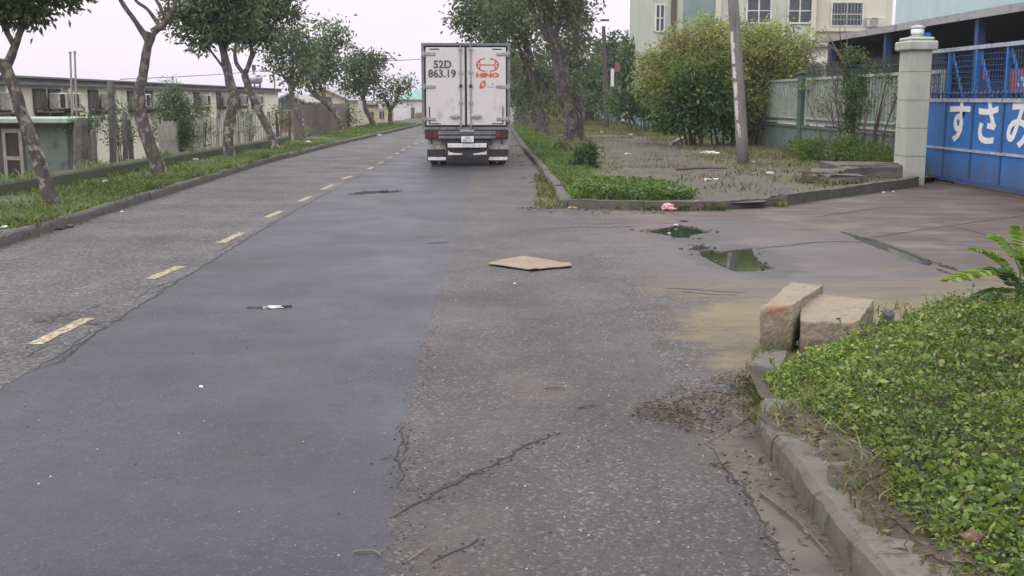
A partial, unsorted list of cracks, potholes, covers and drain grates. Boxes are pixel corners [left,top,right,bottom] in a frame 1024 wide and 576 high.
pothole [690,248,775,272]
crack [370,422,560,518]
pothole [640,224,719,239]
crack [677,288,746,296]
